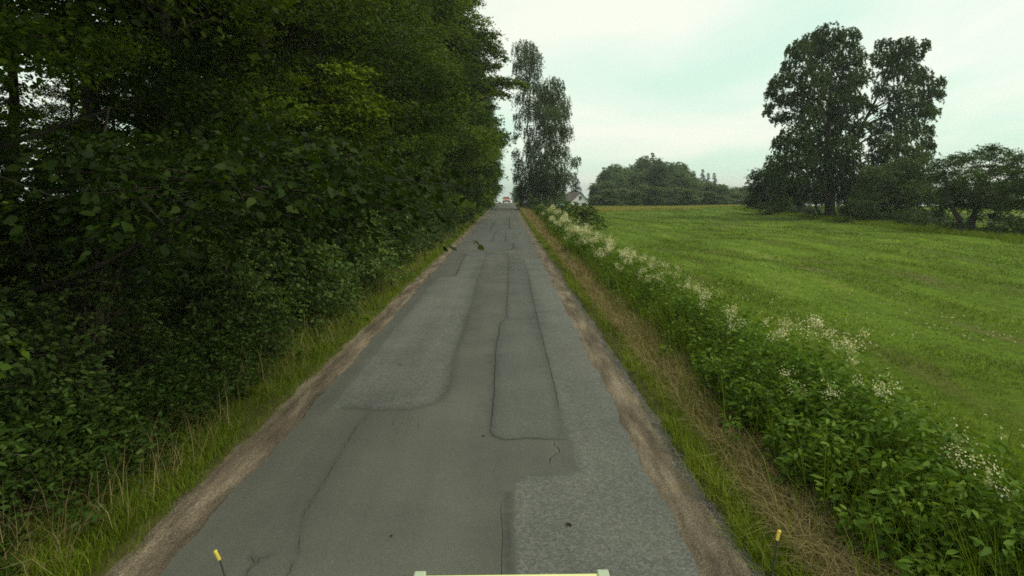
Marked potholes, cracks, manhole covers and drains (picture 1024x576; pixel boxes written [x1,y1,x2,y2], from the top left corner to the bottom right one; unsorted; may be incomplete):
crack [287,422,357,575]
crack [490,210,560,463]
